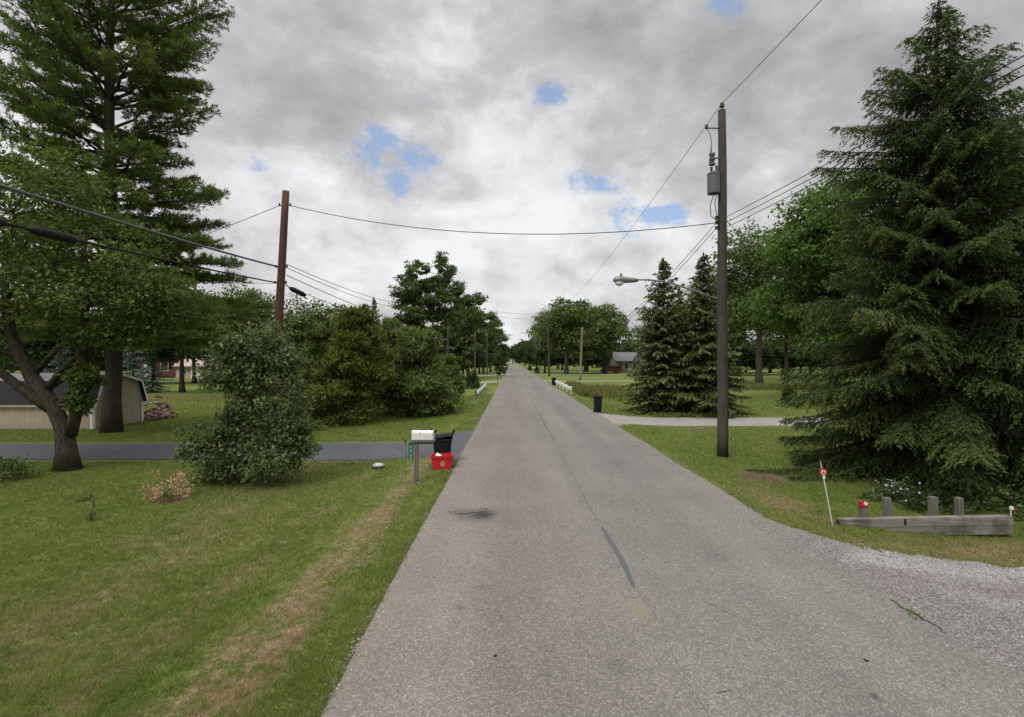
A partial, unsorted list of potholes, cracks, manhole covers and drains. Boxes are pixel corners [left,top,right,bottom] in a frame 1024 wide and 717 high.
crack [890,599,947,634]
